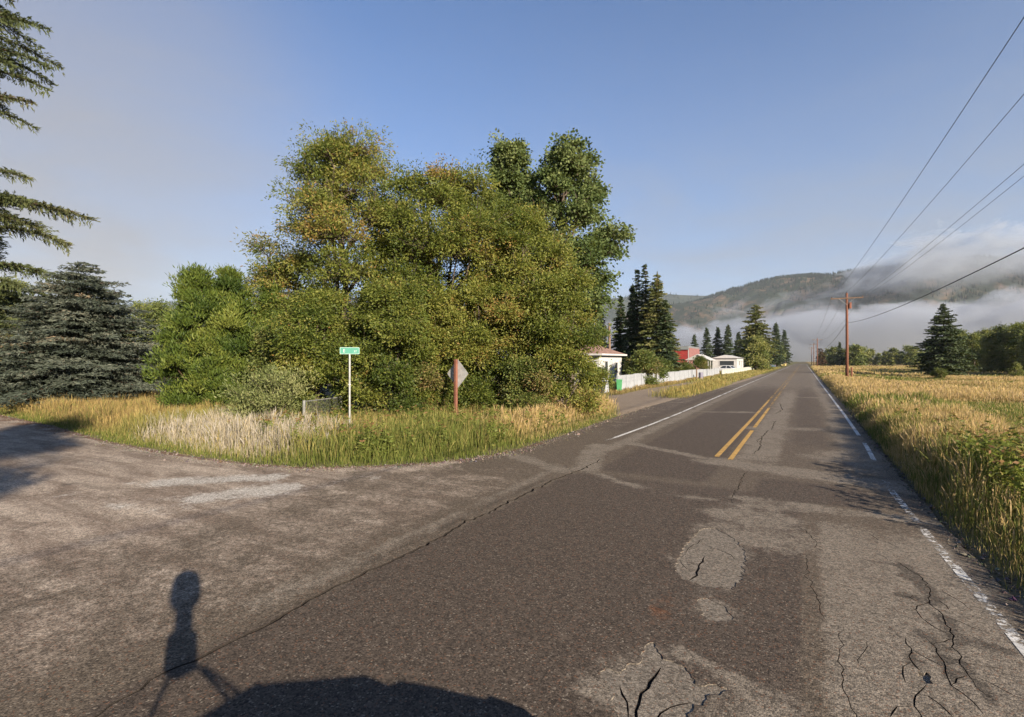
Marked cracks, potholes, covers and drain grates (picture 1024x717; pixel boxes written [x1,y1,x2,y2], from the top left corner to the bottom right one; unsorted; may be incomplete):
crack [881,555,1024,717]
pothole [674,528,747,589]
pothole [600,642,730,717]
pothole [697,598,734,622]
crack [792,525,868,717]
